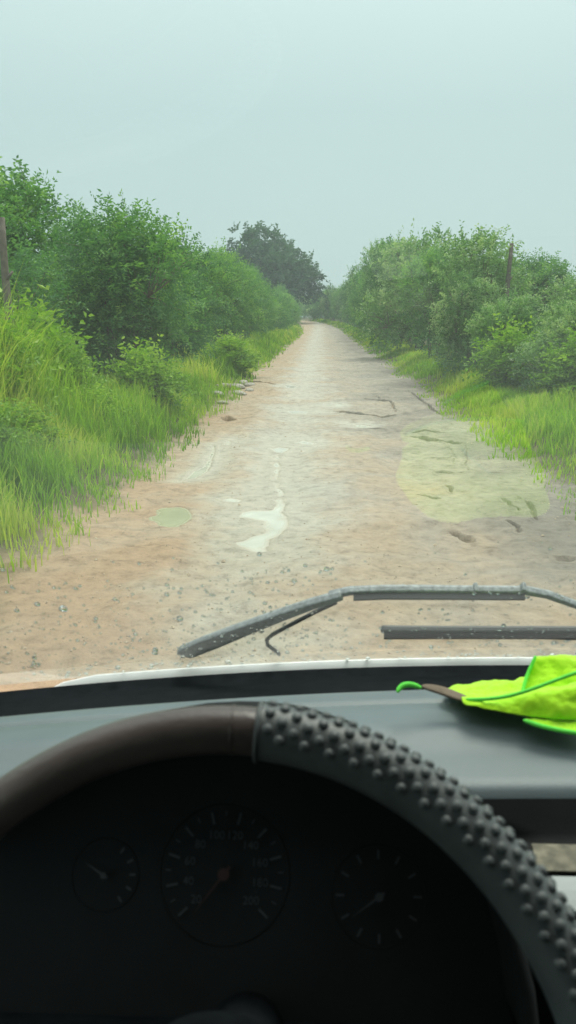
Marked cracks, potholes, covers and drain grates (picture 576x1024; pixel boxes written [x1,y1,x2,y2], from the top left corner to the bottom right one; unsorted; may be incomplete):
crack [332,390,473,501]
pothole [440,528,482,546]
pothole [545,554,576,564]
